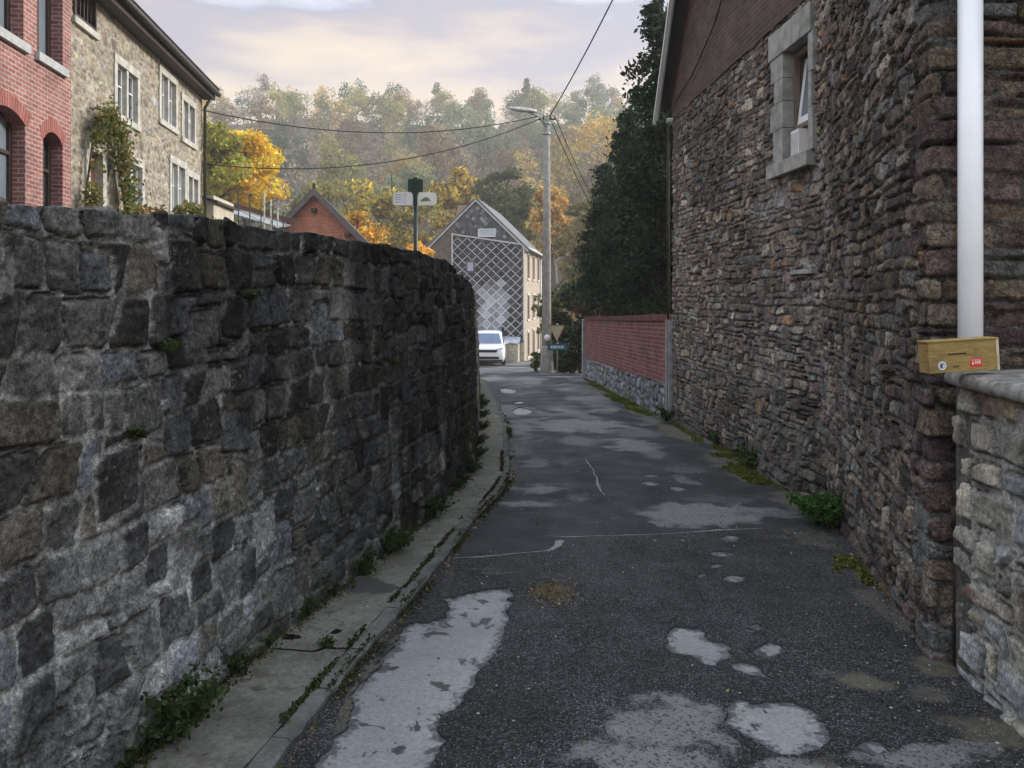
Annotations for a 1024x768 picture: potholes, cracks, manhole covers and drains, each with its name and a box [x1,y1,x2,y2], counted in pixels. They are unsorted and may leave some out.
crack [551,459,610,501]
